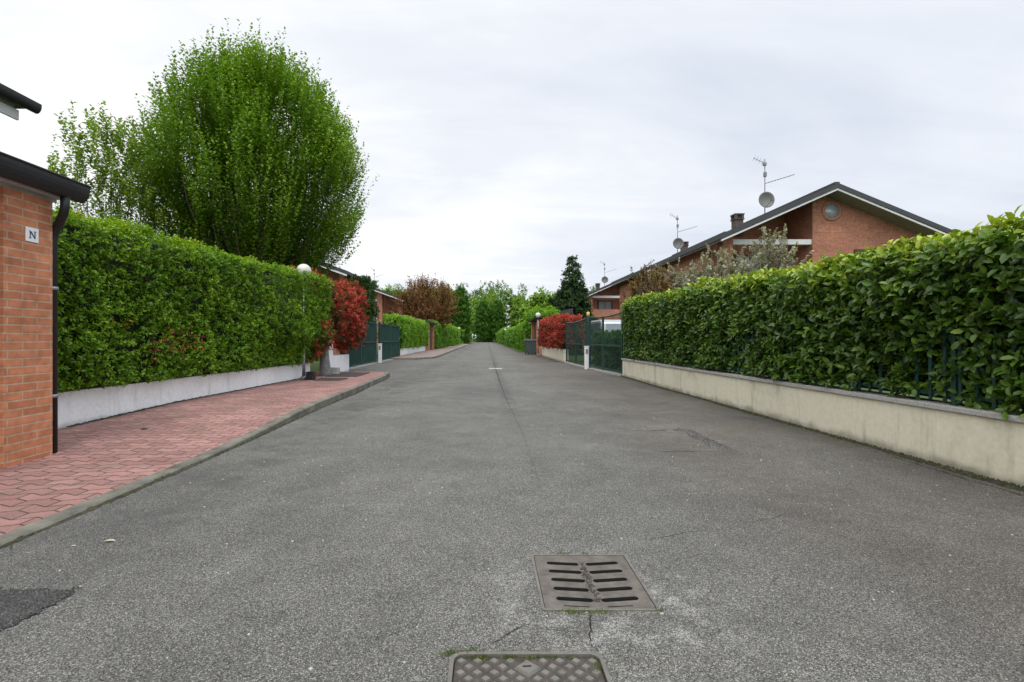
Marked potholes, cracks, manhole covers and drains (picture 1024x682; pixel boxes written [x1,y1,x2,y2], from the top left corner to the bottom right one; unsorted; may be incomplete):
manhole cover [447,651,612,682]
drain grate [531,554,660,615]
